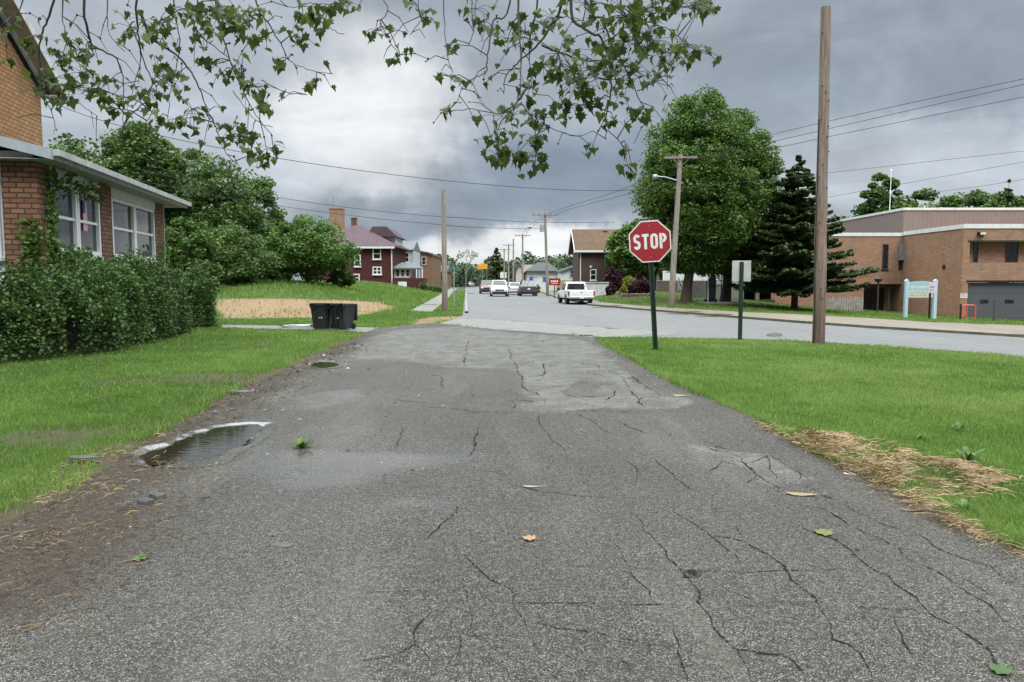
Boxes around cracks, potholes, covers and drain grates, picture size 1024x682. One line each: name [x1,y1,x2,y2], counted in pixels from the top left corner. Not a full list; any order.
crack [508,351,661,452]
pothole [683,568,701,578]
crack [401,375,484,455]
pothole [120,420,278,468]
crack [368,445,1017,681]
